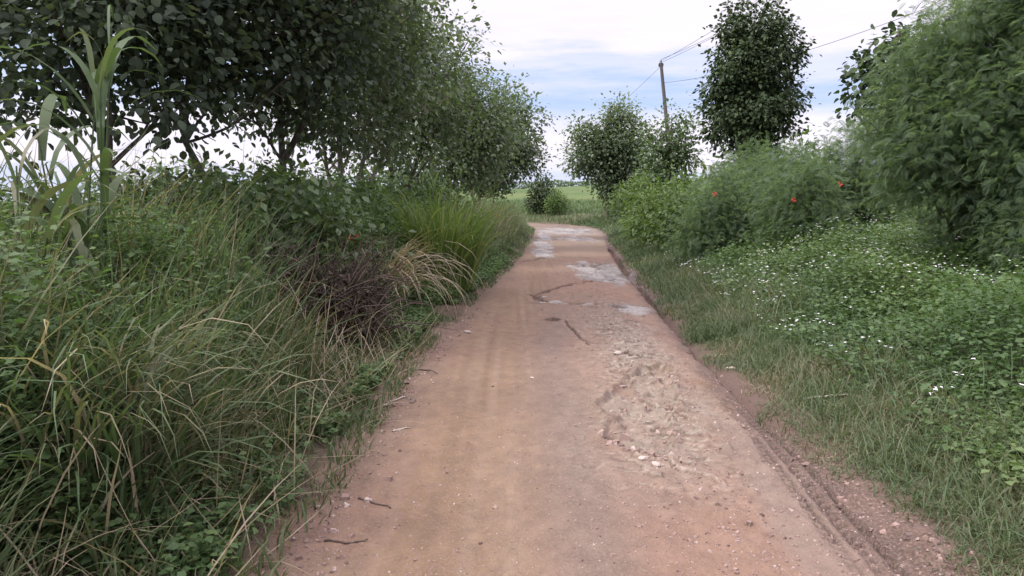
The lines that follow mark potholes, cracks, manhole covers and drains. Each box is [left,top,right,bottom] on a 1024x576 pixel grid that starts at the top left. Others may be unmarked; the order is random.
crack [512,247,716,375]
pothole [590,360,684,462]
